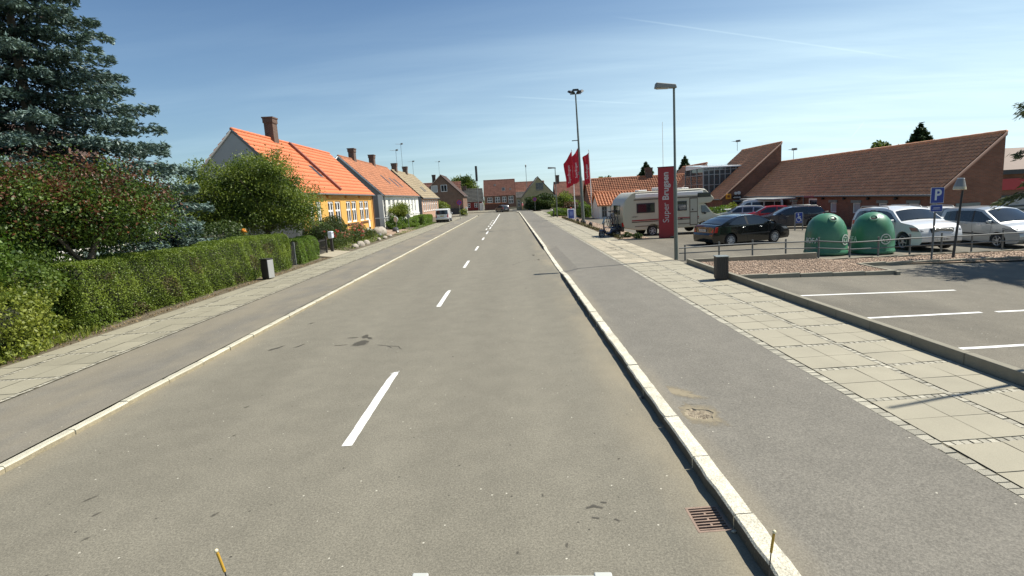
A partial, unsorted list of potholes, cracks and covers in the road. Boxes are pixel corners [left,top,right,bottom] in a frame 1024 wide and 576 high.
drain grate [685,505,733,533]
pothole [685,408,713,419]
